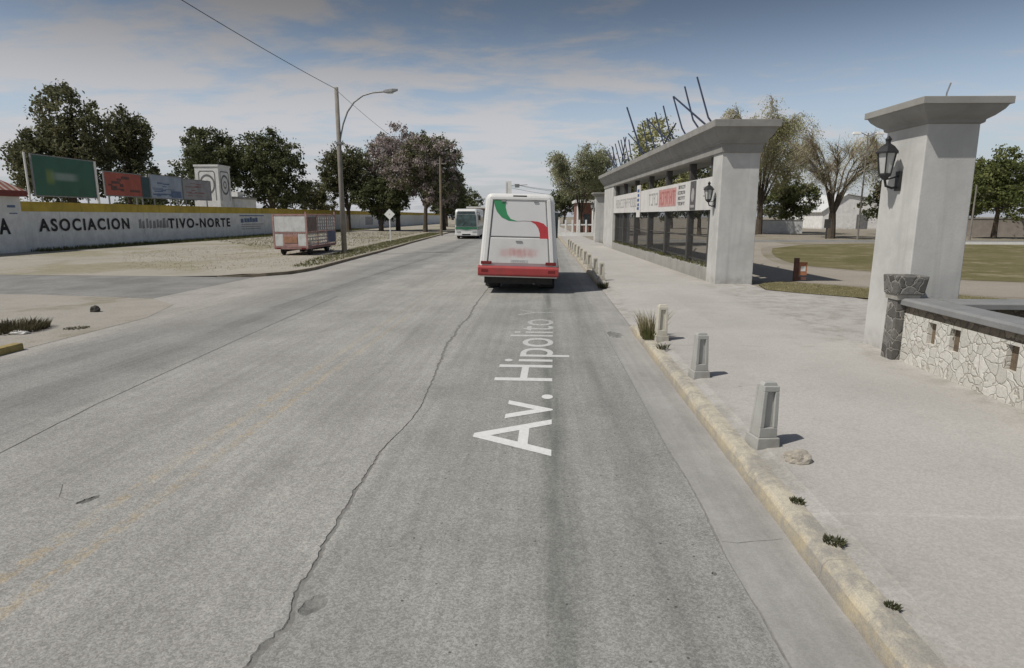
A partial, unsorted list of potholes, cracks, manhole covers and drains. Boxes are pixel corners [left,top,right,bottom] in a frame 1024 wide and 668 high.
pothole [298,594,328,616]
crack [243,287,489,668]
